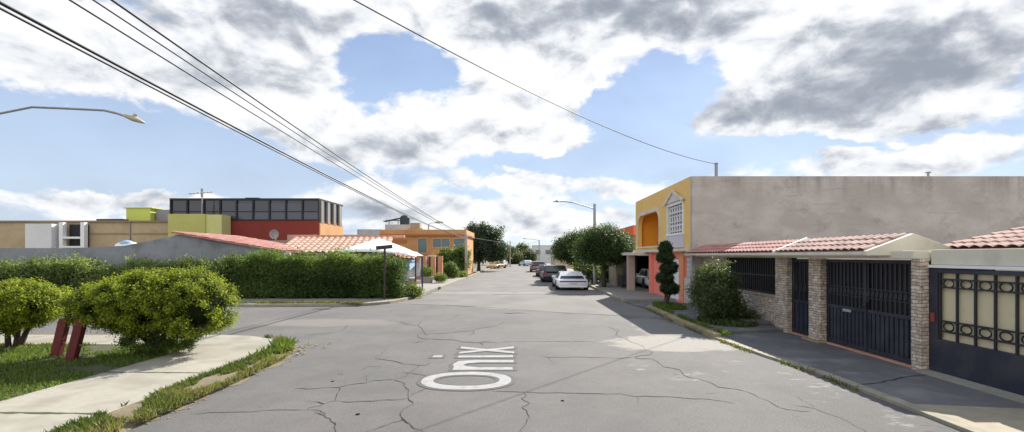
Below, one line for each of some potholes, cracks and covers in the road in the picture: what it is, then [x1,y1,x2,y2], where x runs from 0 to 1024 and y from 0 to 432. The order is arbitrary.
crack [415,292,866,432]
crack [198,350,428,432]
